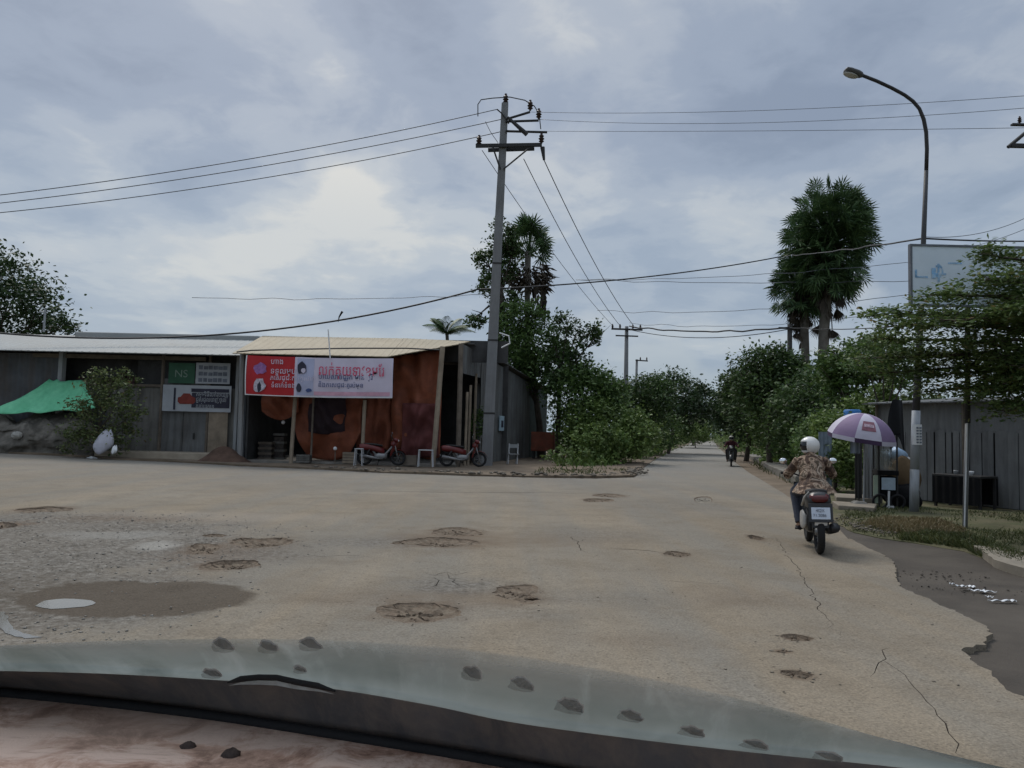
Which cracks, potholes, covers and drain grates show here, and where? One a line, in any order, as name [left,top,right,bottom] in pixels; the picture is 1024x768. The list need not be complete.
crack [775,537,843,637]
pothole [229,537,293,549]
pothole [492,584,540,604]
pothole [376,602,461,623]
pothole [390,537,481,548]
pothole [431,527,482,536]
pothole [198,560,261,570]
pothole [188,543,219,555]
pothole [780,670,815,680]
crack [872,648,963,758]
